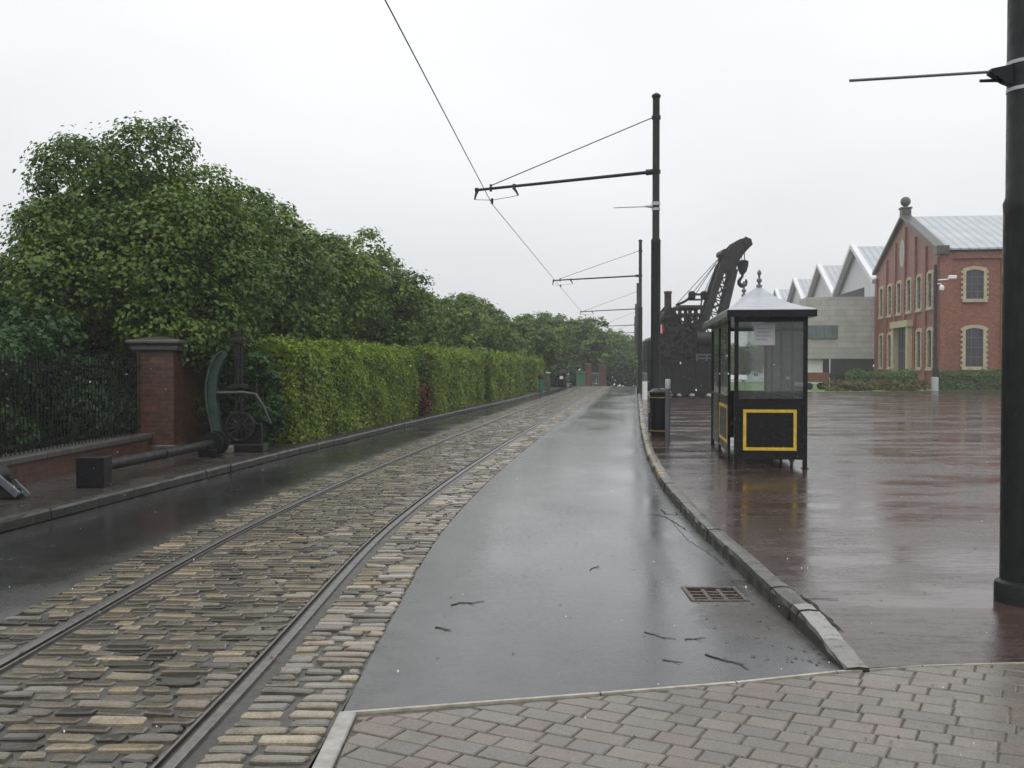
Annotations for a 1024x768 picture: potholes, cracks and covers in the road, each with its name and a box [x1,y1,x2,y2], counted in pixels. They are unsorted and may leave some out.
crack [653,509,724,566]
drain grate [681,586,750,601]
